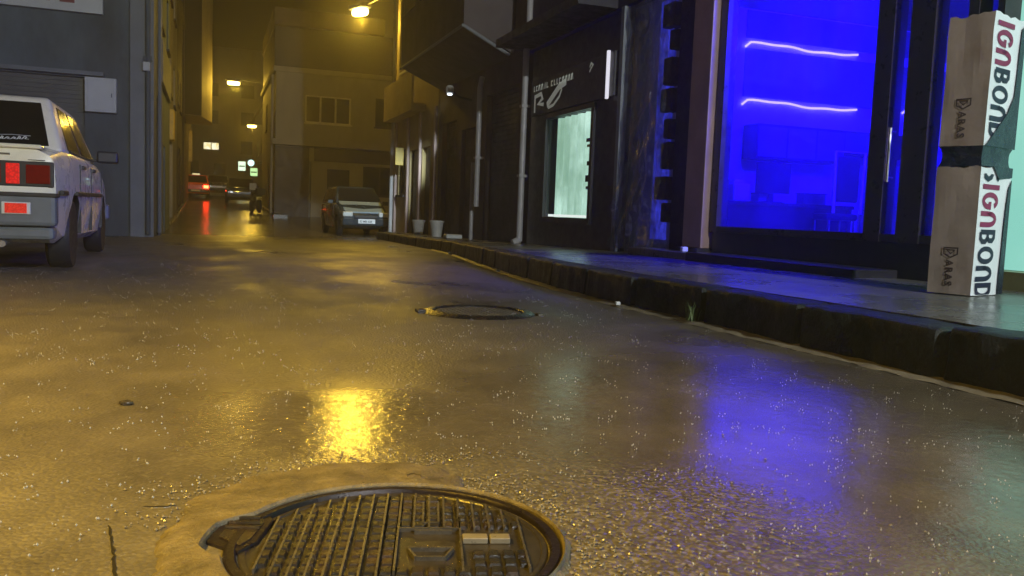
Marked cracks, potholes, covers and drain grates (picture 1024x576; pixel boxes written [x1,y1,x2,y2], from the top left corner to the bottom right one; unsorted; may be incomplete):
crack [108,525,118,576]
manhole cover [206,487,562,576]
manhole cover [415,305,545,320]
